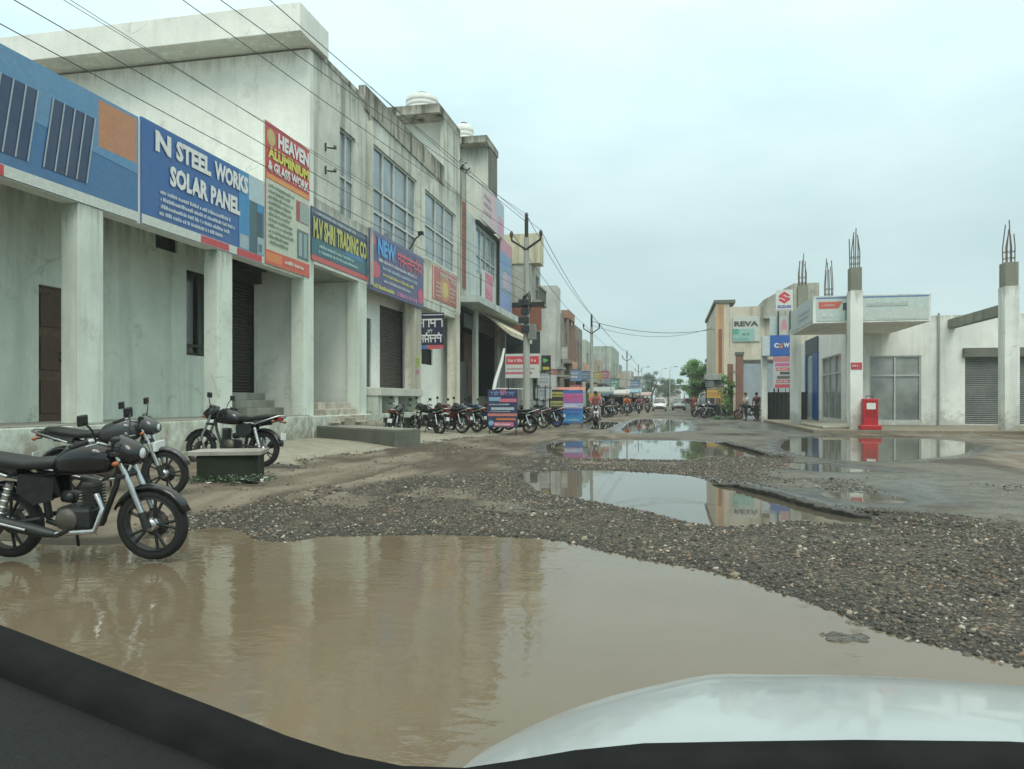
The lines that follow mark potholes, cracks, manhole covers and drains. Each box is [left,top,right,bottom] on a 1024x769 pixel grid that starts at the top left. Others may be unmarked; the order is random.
pothole [514,469,883,529]
pothole [0,525,1024,768]
pothole [777,436,1000,462]
pothole [619,419,691,433]
pothole [541,440,774,460]
